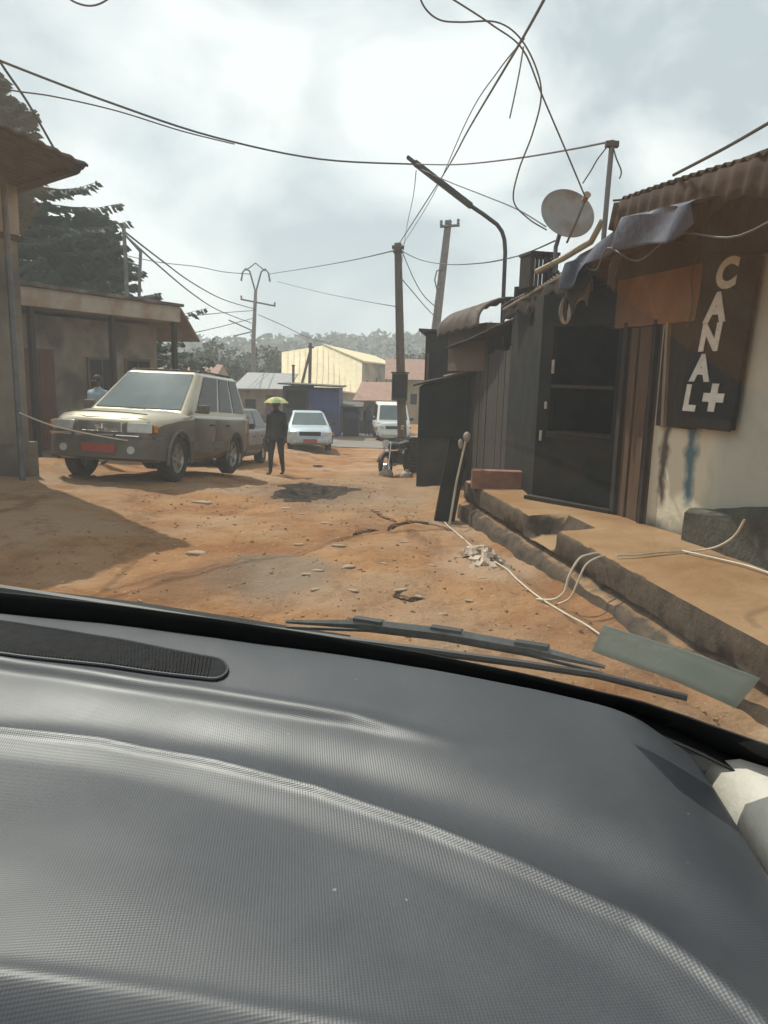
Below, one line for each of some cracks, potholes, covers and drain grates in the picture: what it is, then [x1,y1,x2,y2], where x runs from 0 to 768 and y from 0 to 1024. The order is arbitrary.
crack [353,510,453,536]
pothole [270,482,362,503]
